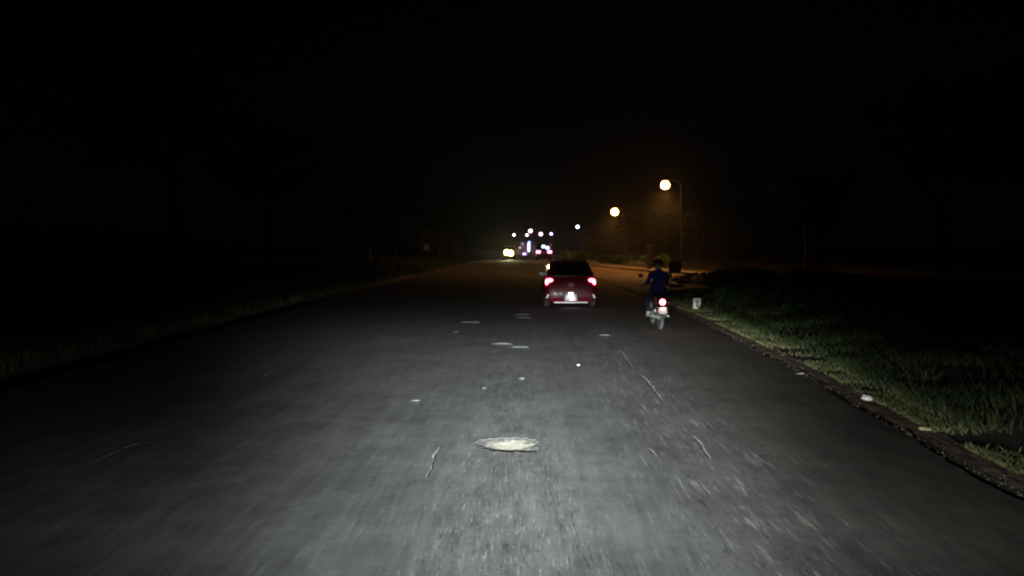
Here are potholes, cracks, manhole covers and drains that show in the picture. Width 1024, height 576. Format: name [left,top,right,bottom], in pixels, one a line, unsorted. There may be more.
pothole [469,437,542,453]
crack [691,435,711,459]
crack [426,447,441,480]
crack [85,441,155,466]
crack [618,350,663,401]
